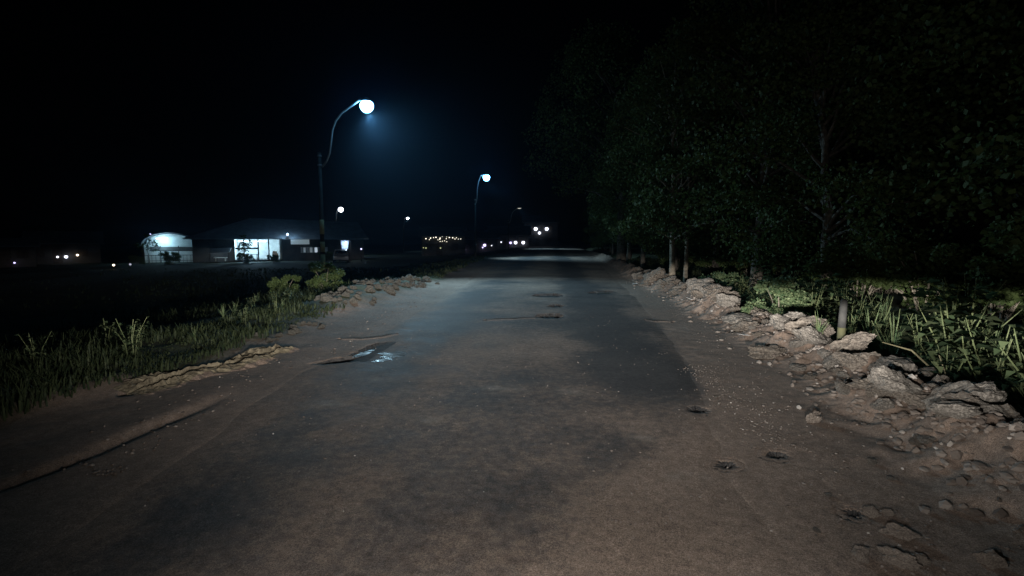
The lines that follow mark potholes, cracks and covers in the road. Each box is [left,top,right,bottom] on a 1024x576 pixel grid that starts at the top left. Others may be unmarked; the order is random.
pothole [707,457,747,472]
pothole [678,403,717,416]
pothole [757,447,801,463]
pothole [304,340,434,367]
